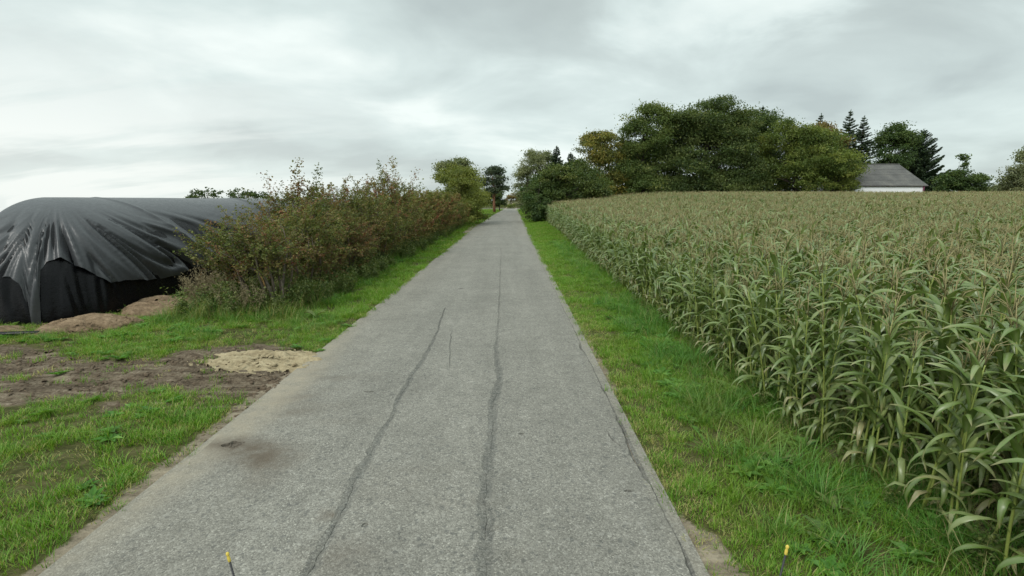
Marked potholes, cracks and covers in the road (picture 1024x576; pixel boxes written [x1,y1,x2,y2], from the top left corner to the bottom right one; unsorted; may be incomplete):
crack [473,249,505,576]
crack [298,307,452,576]
